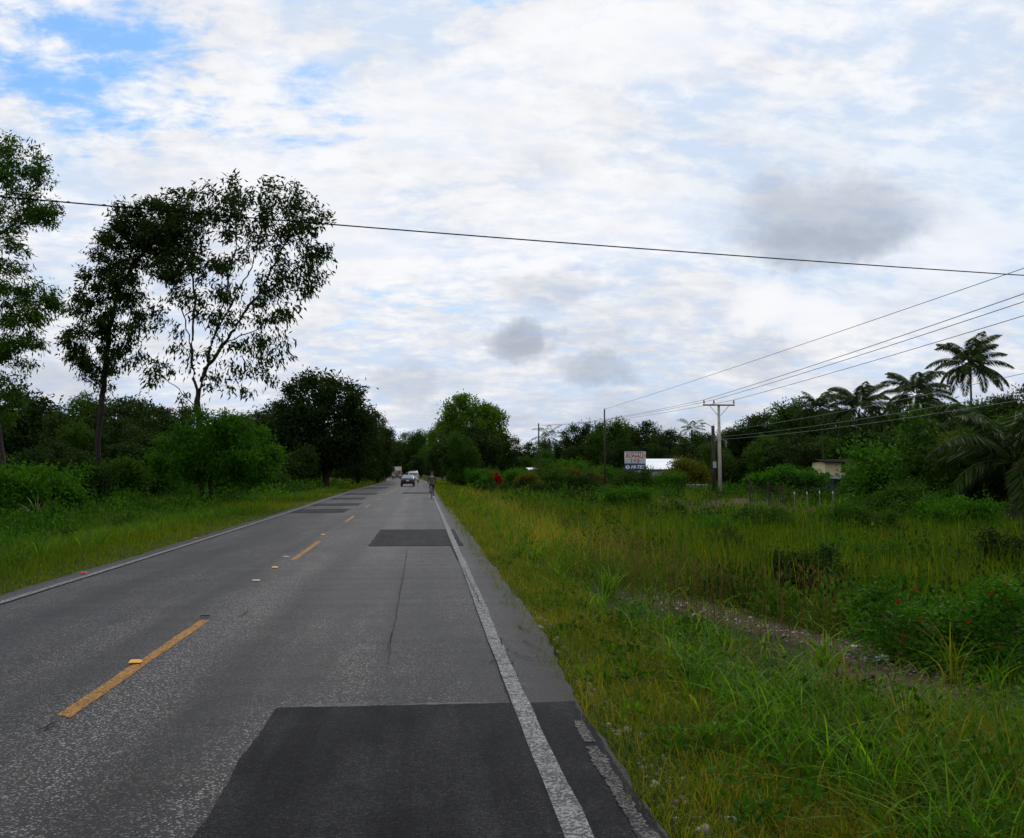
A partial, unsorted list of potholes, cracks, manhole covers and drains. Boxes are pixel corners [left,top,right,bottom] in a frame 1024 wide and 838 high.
crack [386,553,407,680]
